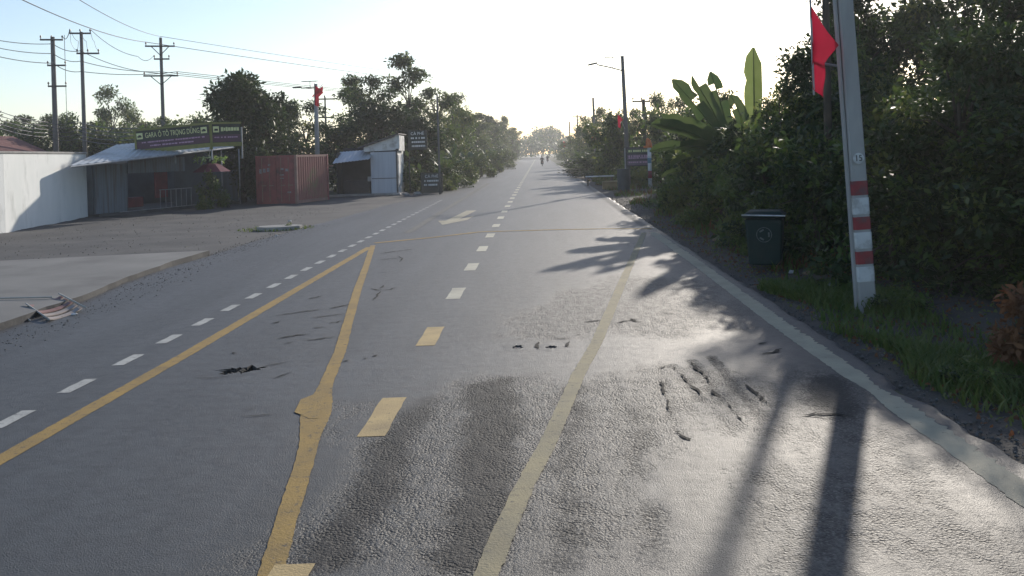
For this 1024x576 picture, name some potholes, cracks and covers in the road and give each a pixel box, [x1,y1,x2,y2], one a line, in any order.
pothole [538,343,566,352]
pothole [503,343,533,352]
crack [232,296,349,353]
crack [519,312,673,349]
crack [658,356,767,426]
pothole [209,364,270,377]
